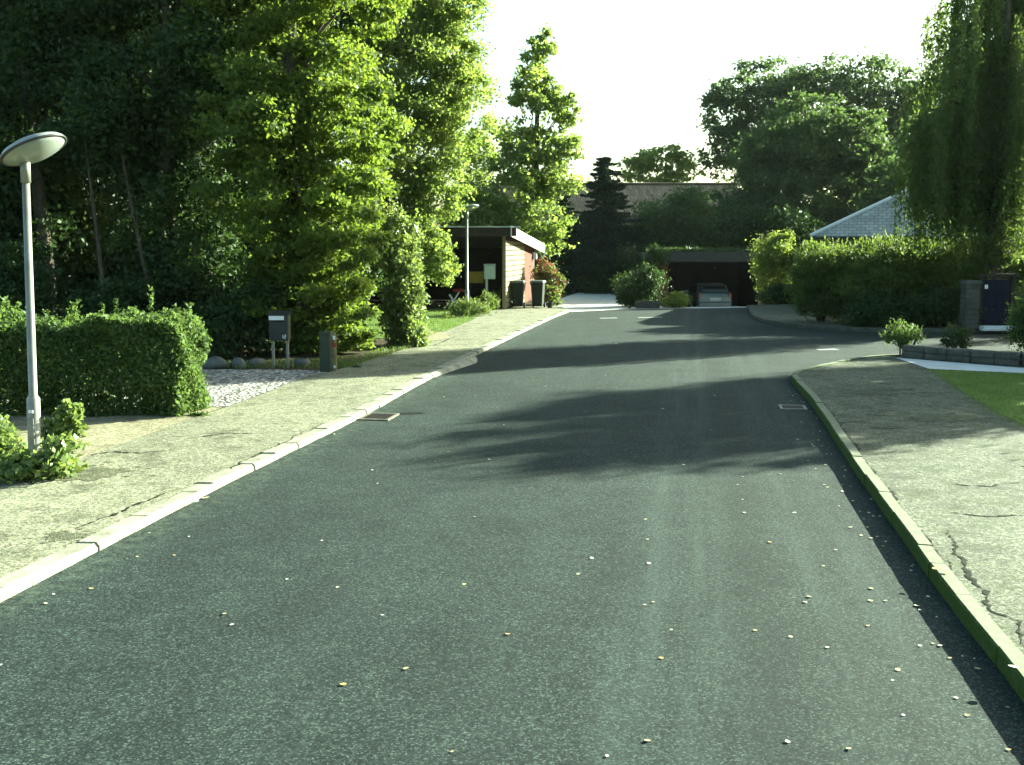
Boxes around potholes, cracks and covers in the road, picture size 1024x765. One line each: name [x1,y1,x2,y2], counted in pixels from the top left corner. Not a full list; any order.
crack [77,488,180,528]
crack [946,512,1024,645]
